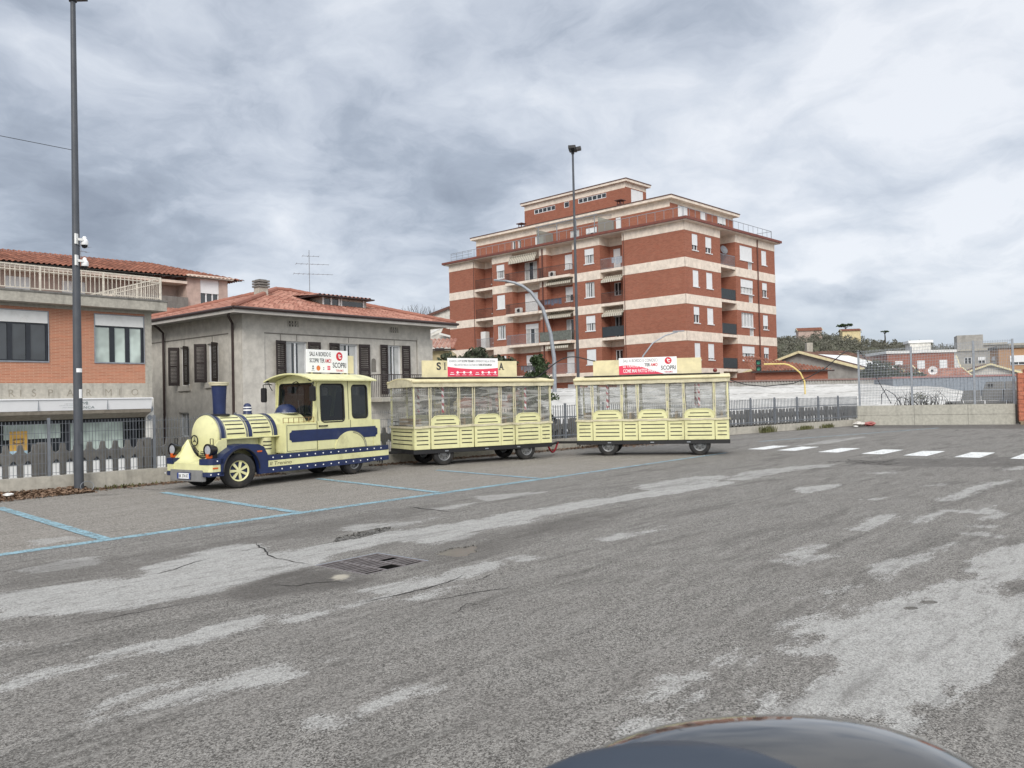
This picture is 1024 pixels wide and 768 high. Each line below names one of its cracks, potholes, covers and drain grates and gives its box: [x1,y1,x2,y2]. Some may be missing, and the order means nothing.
drain grate [315,553,426,575]
pothole [434,545,478,557]
pothole [334,526,393,542]
crack [361,575,513,612]
